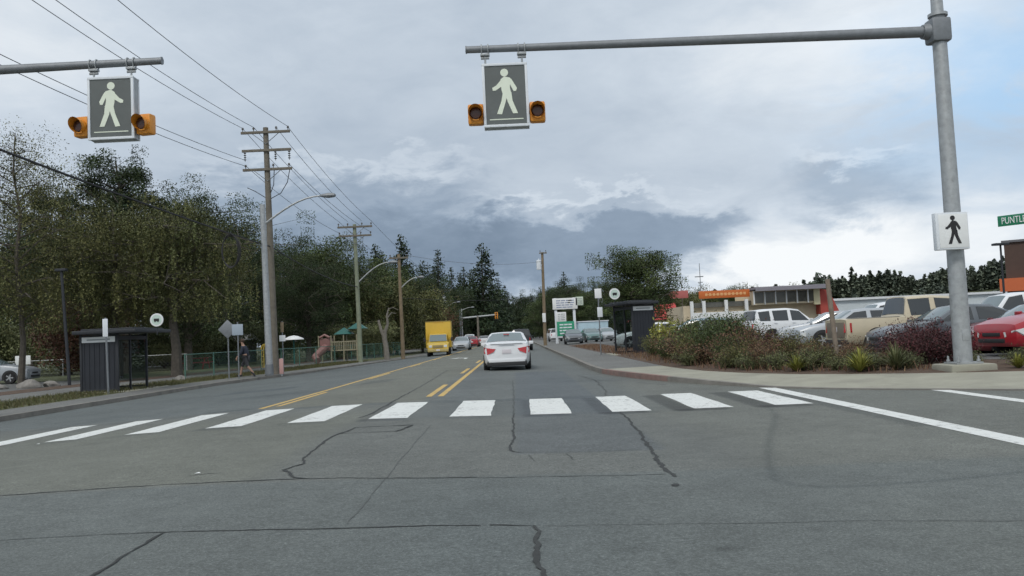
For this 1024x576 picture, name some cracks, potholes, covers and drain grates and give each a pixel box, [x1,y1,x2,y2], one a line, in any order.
crack [7,520,1024,576]
crack [0,370,679,496]
